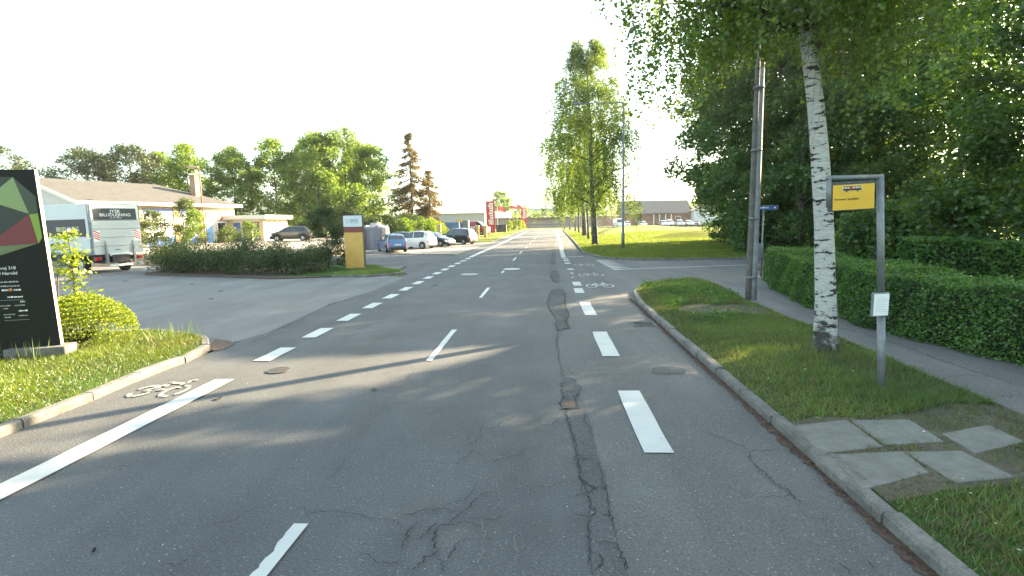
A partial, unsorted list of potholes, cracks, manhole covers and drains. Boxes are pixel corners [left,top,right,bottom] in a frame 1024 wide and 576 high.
crack [411,409,540,465]
crack [513,407,628,570]
crack [287,483,500,573]
crack [748,452,802,502]
